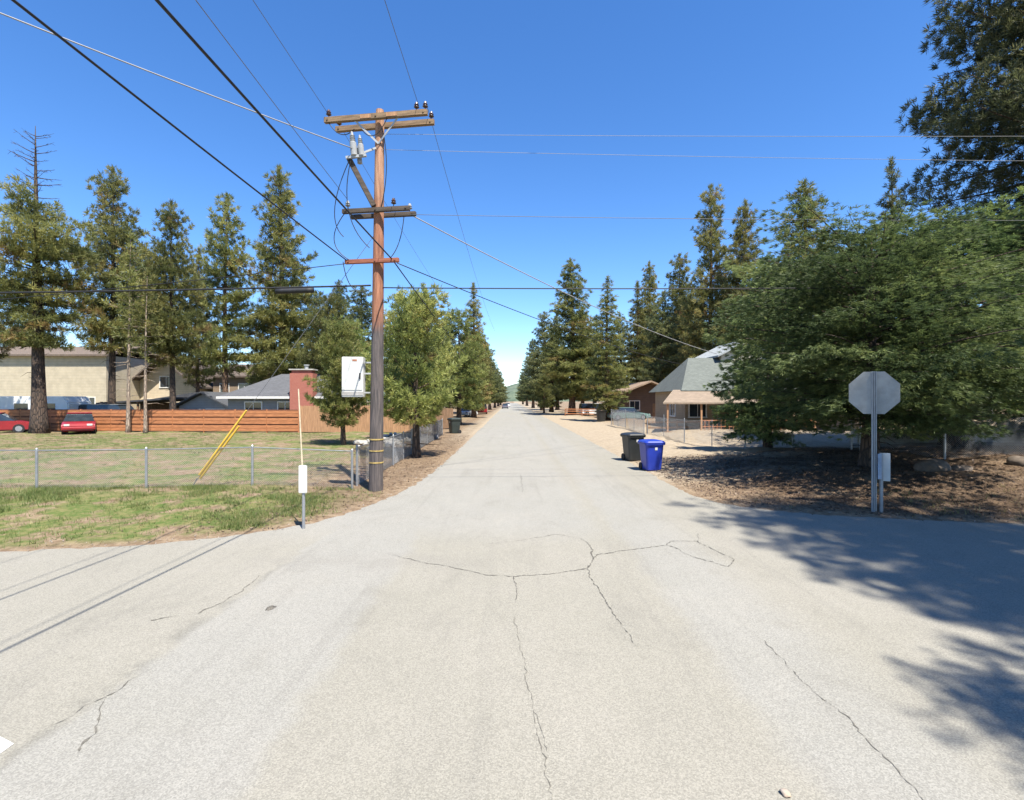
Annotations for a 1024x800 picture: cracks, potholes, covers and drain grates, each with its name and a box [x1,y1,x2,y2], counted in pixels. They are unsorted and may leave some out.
crack [33,671,146,751]
crack [396,534,735,646]
crack [513,616,551,790]
crack [764,640,923,799]
